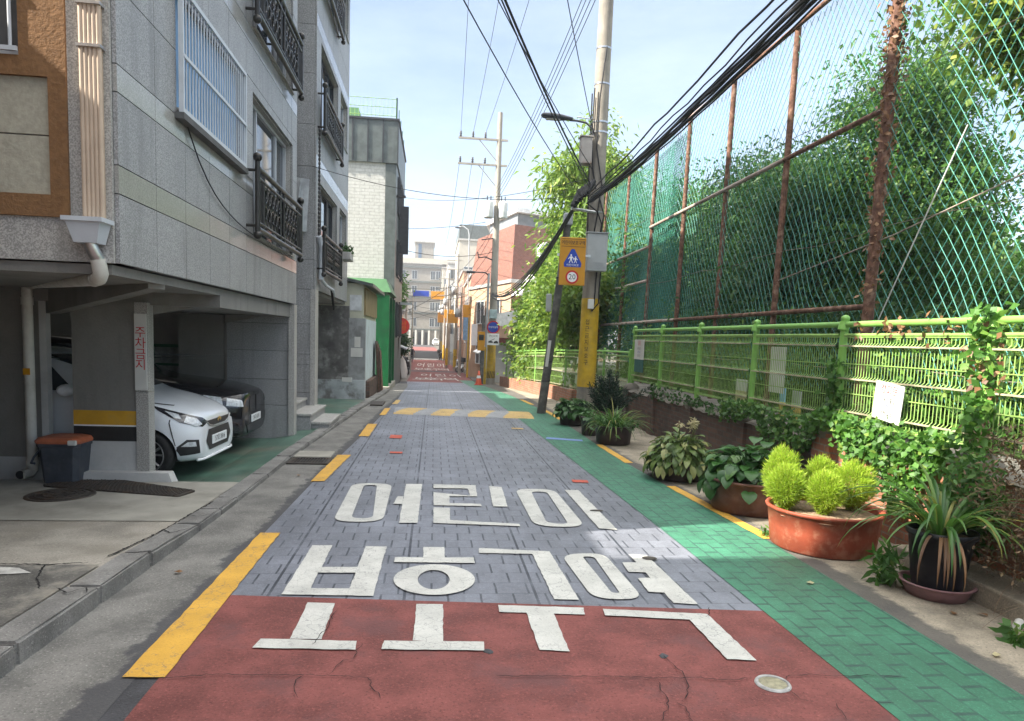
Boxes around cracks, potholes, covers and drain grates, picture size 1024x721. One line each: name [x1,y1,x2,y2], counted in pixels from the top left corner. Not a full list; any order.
manhole cover [23,488,97,502]
crack [496,656,742,721]
drain grate [286,457,333,465]
crack [0,562,88,593]
crack [159,647,380,696]
